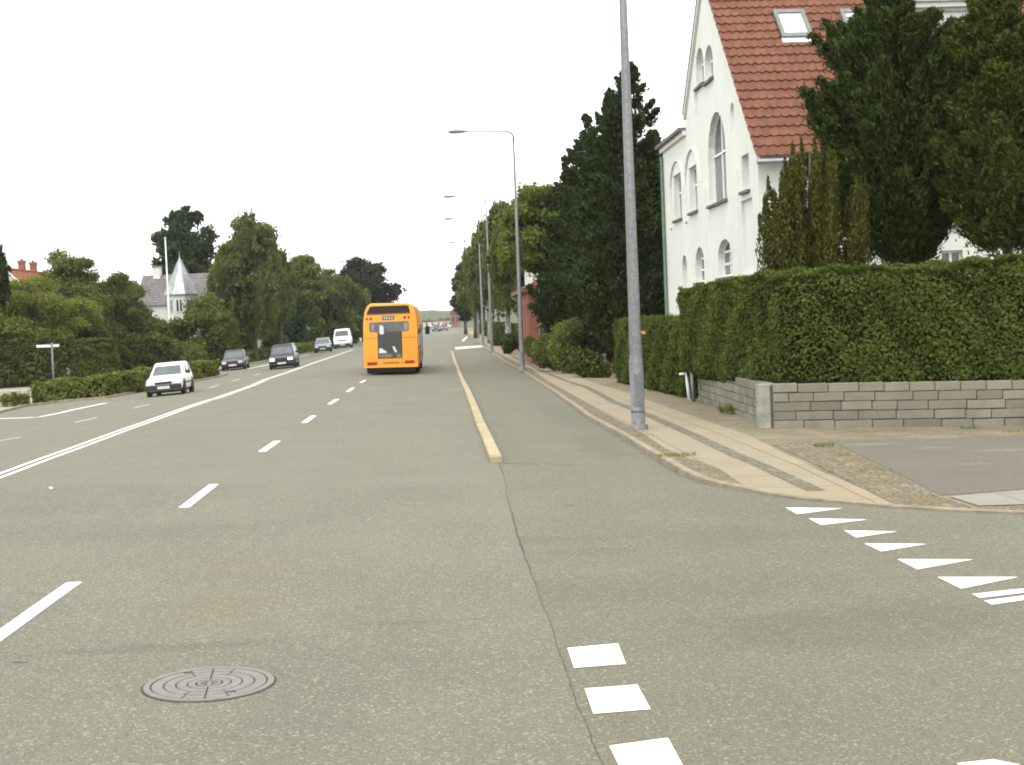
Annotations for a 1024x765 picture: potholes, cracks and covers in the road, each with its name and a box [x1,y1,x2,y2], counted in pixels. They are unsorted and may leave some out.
manhole cover [141,666,277,702]
crack [498,462,603,765]
